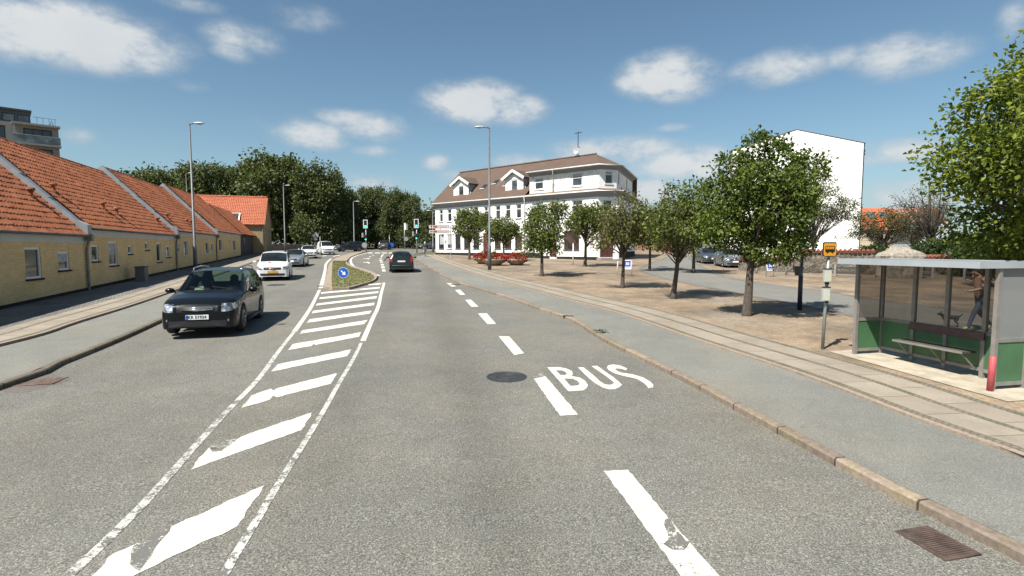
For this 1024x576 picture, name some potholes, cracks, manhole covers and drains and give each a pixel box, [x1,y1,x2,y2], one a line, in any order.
manhole cover [486,371,527,383]
drain grate [11,377,68,387]
drain grate [894,525,982,561]
